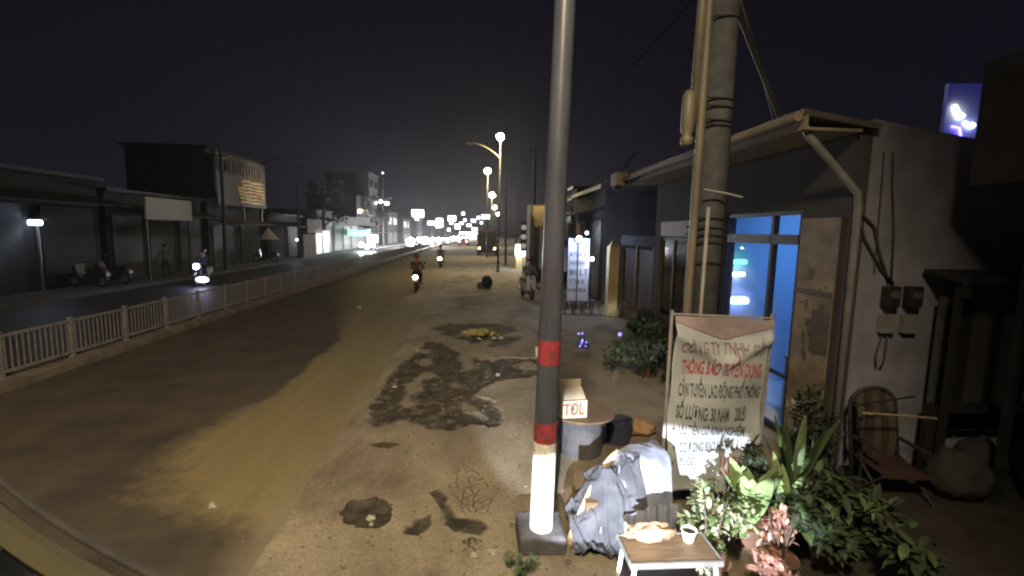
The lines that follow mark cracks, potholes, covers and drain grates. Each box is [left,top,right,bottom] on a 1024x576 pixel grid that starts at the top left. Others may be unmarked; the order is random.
pothole [428,322,525,348]
pothole [362,340,537,431]
pothole [402,512,434,536]
pothole [427,486,492,536]
crack [449,465,493,513]
pothole [339,496,393,529]
